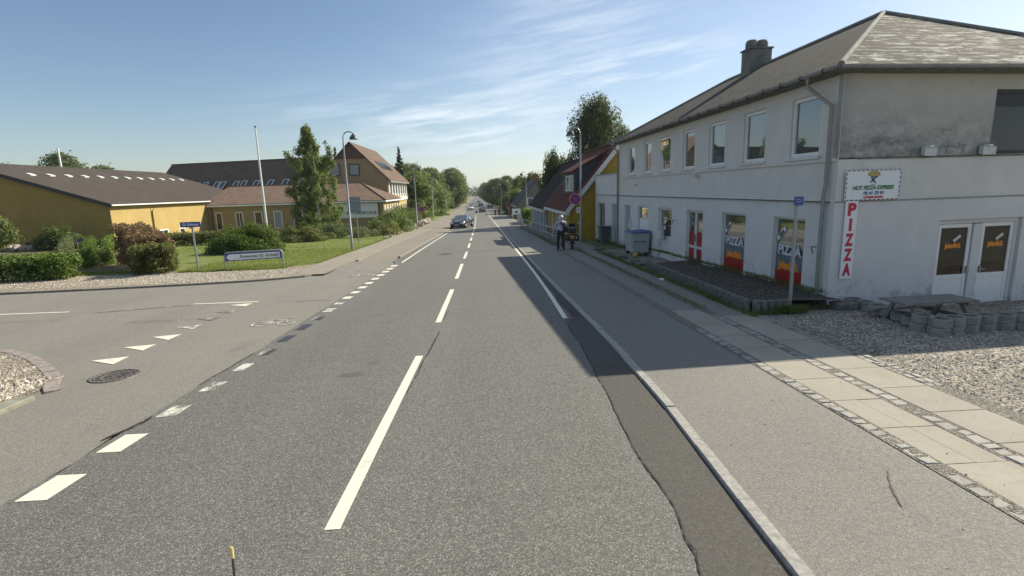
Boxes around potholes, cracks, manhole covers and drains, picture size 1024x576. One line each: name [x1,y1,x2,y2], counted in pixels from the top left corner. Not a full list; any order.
manhole cover [87,368,141,383]
crack [887,469,904,509]
